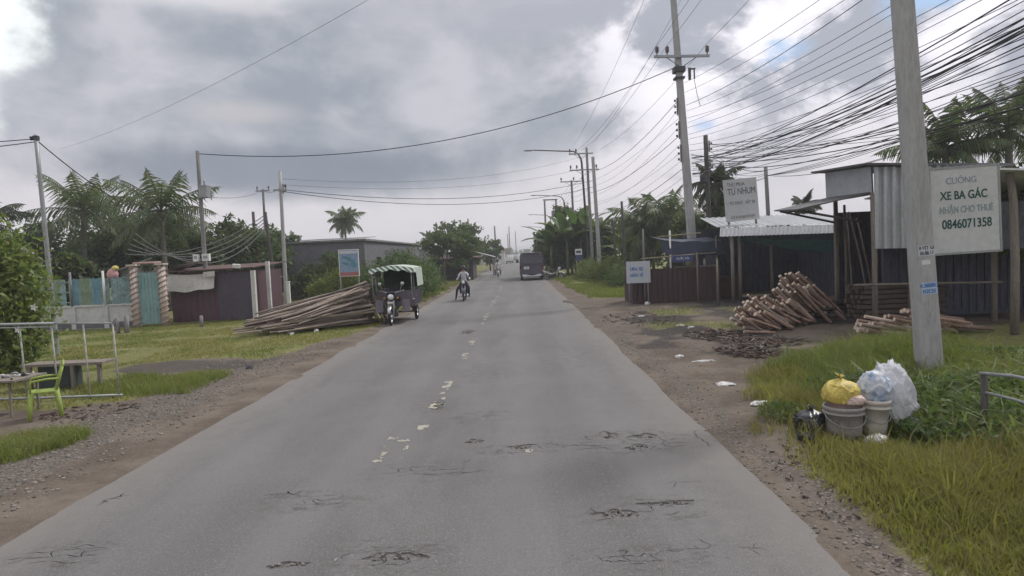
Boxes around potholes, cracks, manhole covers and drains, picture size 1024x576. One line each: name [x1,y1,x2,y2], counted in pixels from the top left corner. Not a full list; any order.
pothole [266,561,312,569]
pothole [359,552,430,563]
pothole [588,508,640,519]
